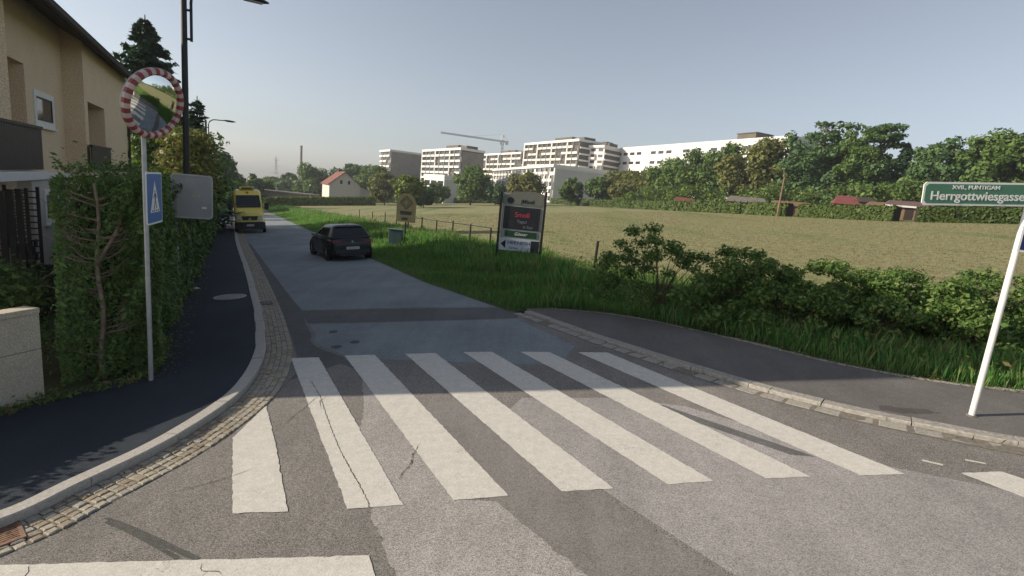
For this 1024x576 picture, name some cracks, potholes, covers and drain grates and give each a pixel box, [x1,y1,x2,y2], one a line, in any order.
drain grate [0,520,27,547]
crack [287,381,371,510]
